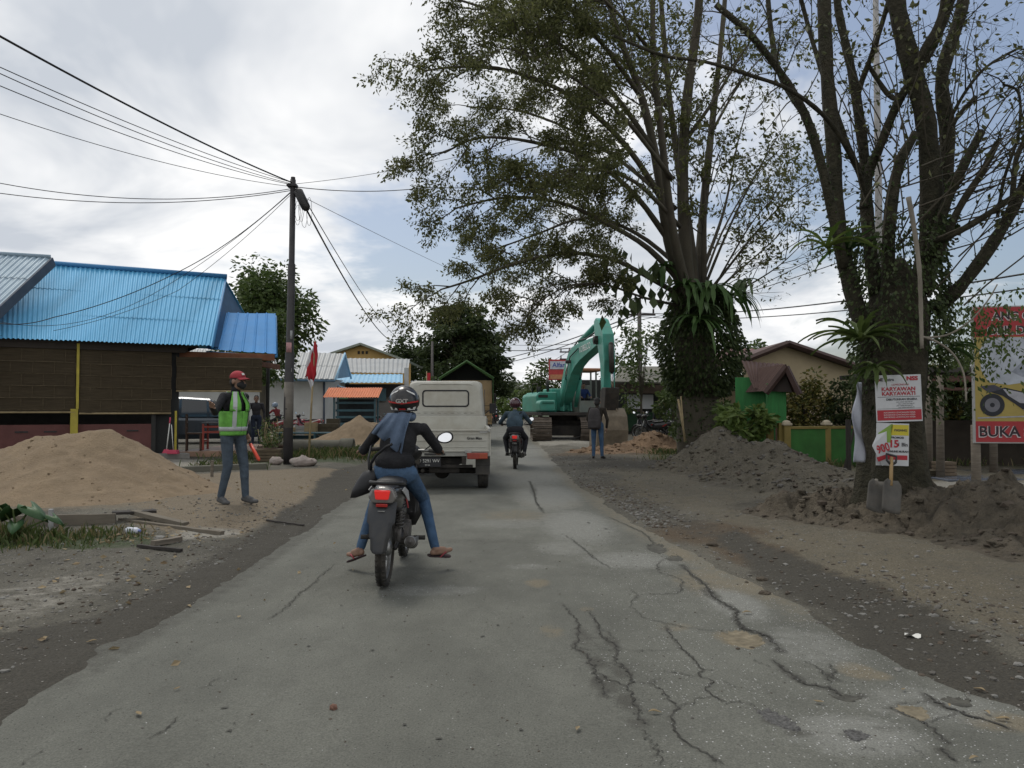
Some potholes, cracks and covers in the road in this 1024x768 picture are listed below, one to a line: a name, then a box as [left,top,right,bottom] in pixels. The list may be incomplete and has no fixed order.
pothole [843,729,870,742]
crack [890,693,1011,761]
pothole [940,696,972,708]
crack [567,560,779,764]
crack [754,659,862,698]
